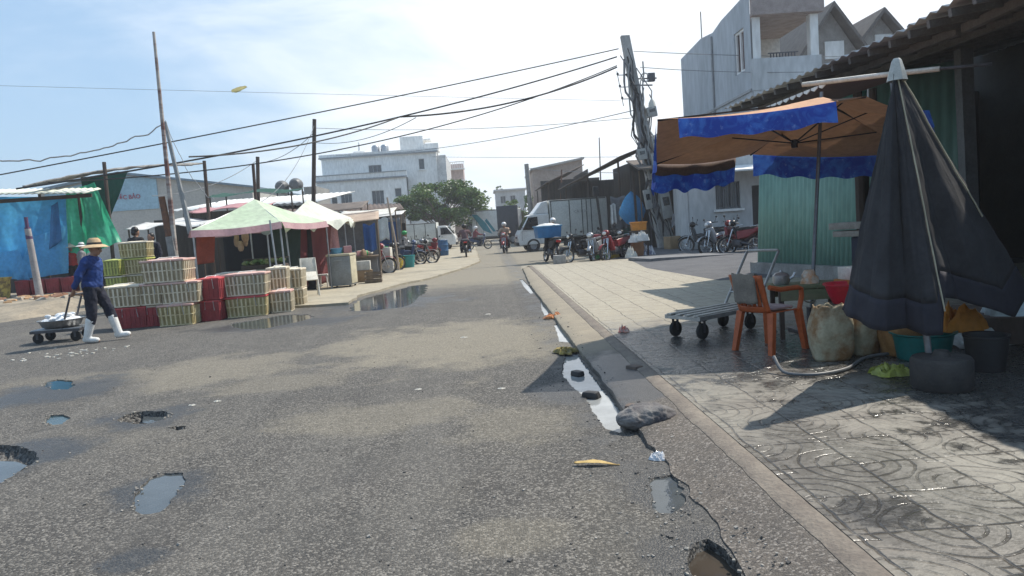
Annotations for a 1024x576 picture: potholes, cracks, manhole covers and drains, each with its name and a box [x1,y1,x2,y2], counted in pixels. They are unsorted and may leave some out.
pothole [645,473,690,517]
pothole [681,539,742,576]
pothole [0,445,42,483]
pothole [41,414,70,426]
pothole [130,472,186,514]
pothole [41,378,75,390]
pothole [112,410,173,424]
